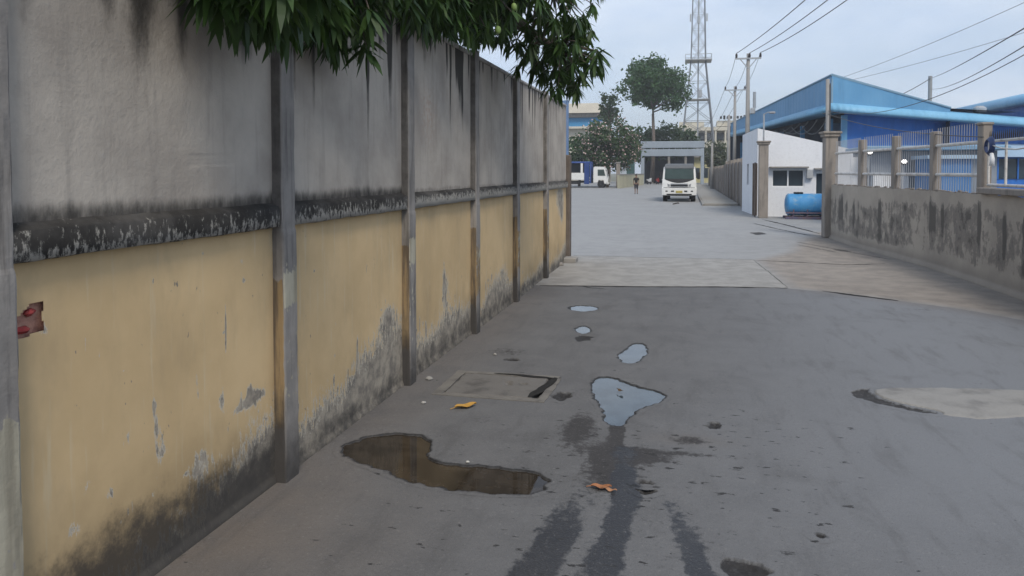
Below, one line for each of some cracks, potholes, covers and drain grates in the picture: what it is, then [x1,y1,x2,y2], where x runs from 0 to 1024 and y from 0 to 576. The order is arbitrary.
manhole cover [432,370,561,403]
pothole [584,375,672,428]
pothole [570,325,596,334]
pothole [696,419,730,432]
pothole [333,430,557,498]
pothole [547,390,579,403]
pothole [613,342,654,365]
pothole [709,553,783,576]
